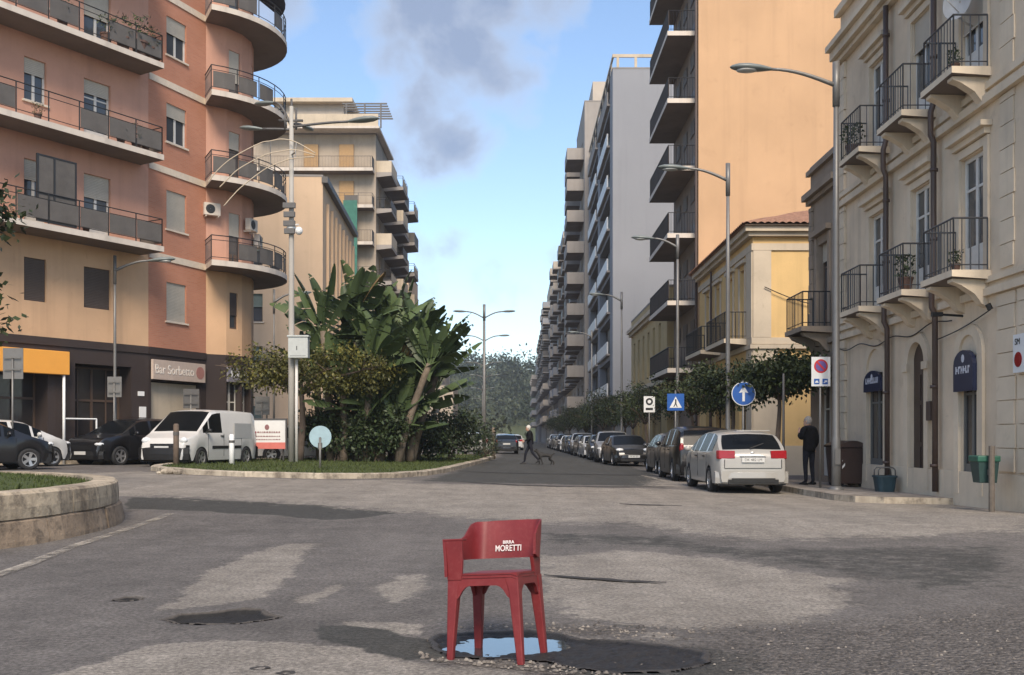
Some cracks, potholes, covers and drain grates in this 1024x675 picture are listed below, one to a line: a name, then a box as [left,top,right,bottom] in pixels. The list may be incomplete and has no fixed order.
crack [544,574,666,583]
pothole [161,607,281,625]
pothole [428,629,712,674]
